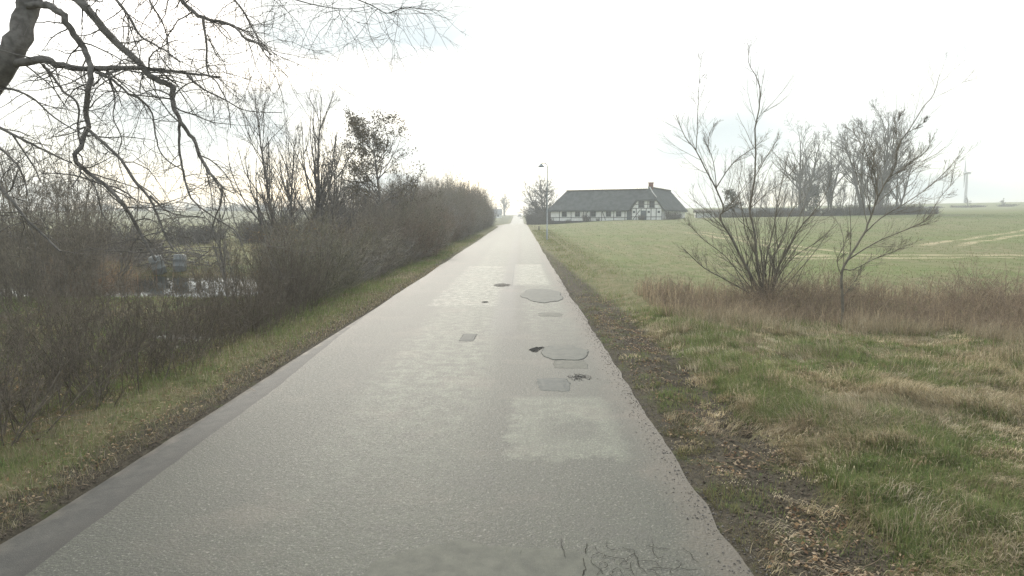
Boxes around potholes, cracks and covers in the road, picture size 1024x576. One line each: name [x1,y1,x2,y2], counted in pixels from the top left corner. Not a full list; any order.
crack [561,542,698,576]
